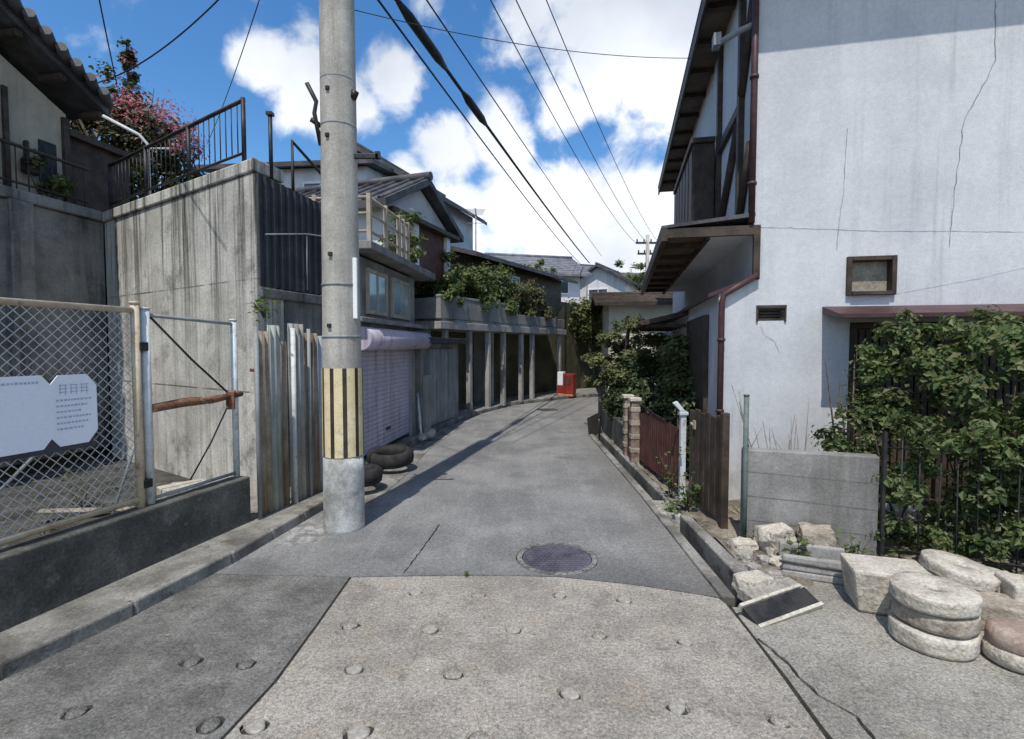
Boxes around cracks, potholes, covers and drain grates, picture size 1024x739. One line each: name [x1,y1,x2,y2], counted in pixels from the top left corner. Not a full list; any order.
crack [762,643,874,739]
manhole cover [517,542,597,576]
